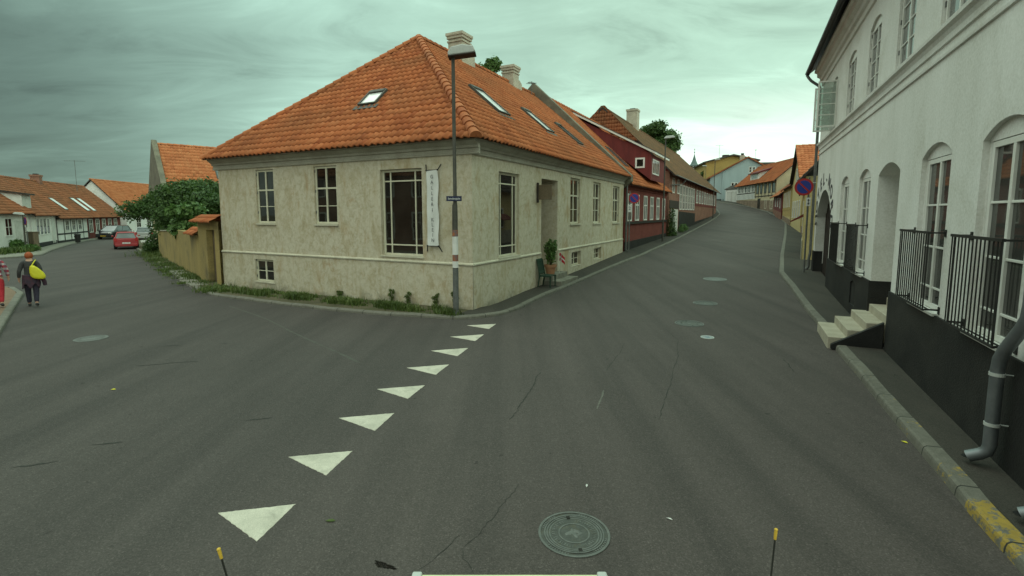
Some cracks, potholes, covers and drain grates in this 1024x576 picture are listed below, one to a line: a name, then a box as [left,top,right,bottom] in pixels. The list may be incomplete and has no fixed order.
crack [420,488,516,572]
manhole cover [538,511,610,558]
crack [658,330,679,420]
